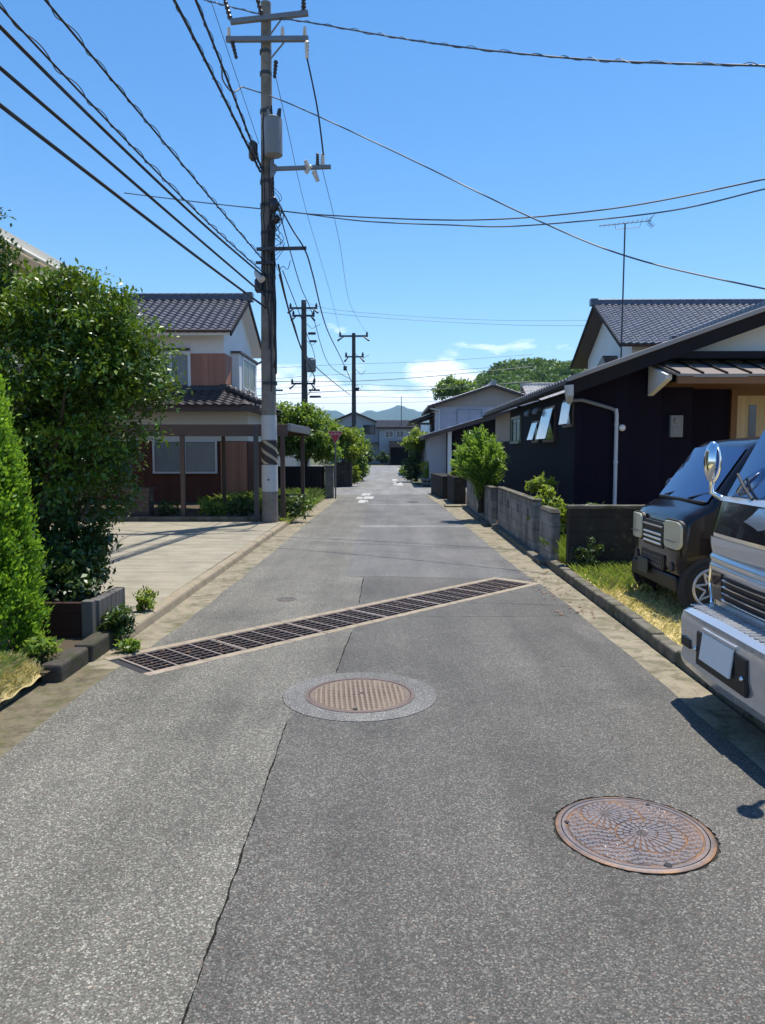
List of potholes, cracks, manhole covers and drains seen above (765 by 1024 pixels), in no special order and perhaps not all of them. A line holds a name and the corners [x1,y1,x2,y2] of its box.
drain grate [103,577,541,676]
manhole cover [283,672,437,722]
manhole cover [553,797,720,876]
